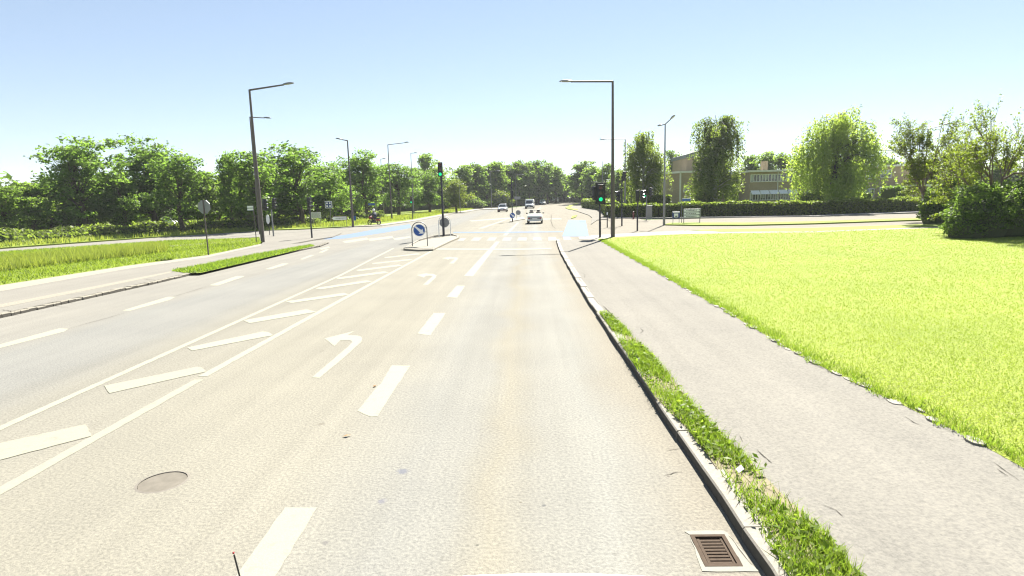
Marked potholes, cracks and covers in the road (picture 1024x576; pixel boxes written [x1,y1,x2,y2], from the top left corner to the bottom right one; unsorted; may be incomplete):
drain grate [690,534,743,567]
manhole cover [134,471,190,494]
